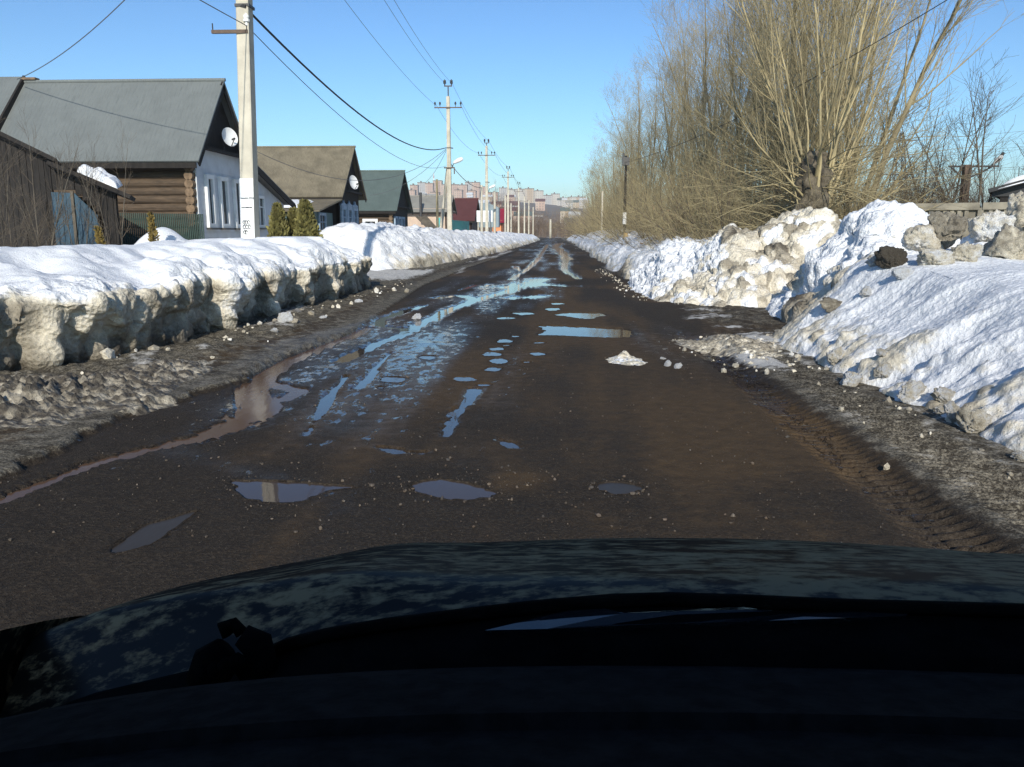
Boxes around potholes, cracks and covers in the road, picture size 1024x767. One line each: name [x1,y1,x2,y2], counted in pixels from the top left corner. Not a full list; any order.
pothole [105,509,200,556]
pothole [594,481,646,495]
pothole [225,479,362,504]
pothole [530,324,639,339]
pothole [407,478,501,501]
